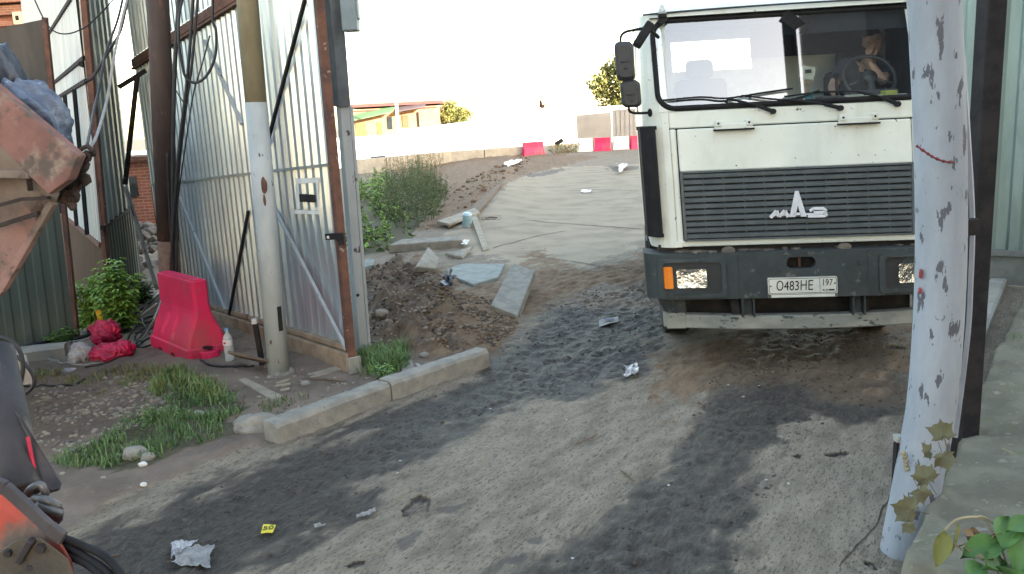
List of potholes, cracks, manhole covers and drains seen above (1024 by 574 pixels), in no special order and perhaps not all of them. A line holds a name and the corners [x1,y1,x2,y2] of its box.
pothole [387,485,443,529]
